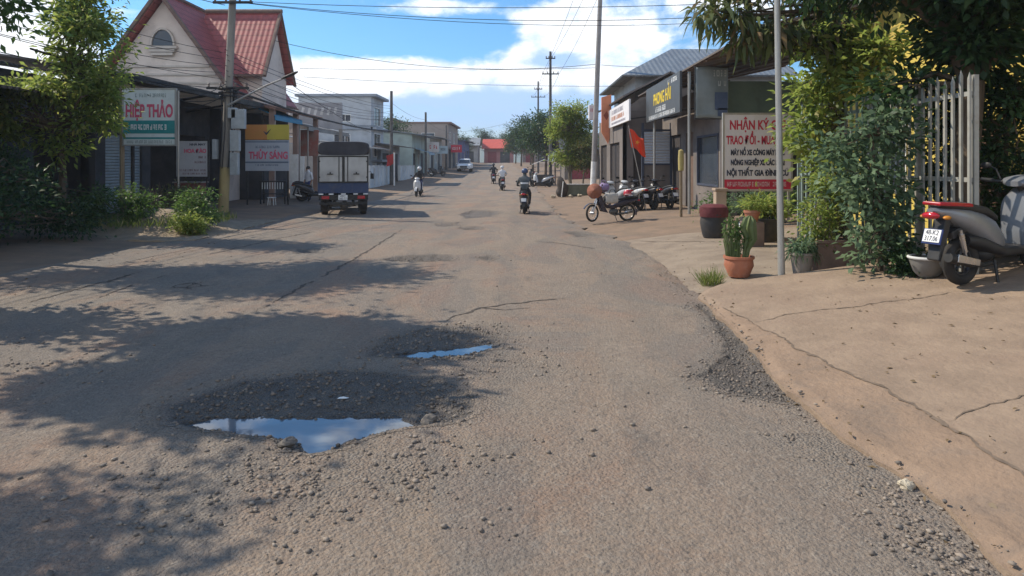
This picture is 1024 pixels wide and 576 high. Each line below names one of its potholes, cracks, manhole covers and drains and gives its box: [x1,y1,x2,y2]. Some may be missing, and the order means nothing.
crack [256,229,402,311]
pothole [364,325,508,361]
pothole [156,368,486,456]
pothole [690,304,801,406]
crack [446,298,562,321]
